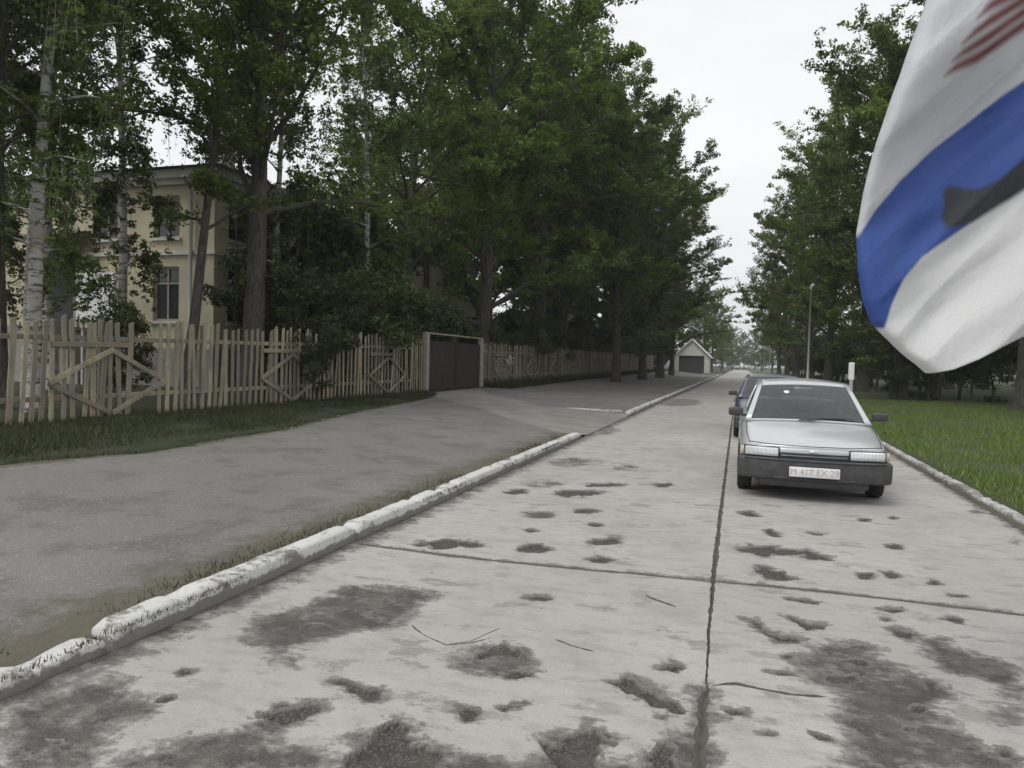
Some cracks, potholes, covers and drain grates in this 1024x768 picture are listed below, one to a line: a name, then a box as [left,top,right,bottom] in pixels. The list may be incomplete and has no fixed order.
crack [645,595,676,607]
pothole [413,539,484,550]
pothole [255,699,328,725]
pothole [786,615,828,630]
pothole [744,618,803,642]
pothole [516,543,551,553]
pothole [606,676,688,715]
crack [412,625,500,645]
pothole [737,543,835,561]
crack [713,682,824,698]
